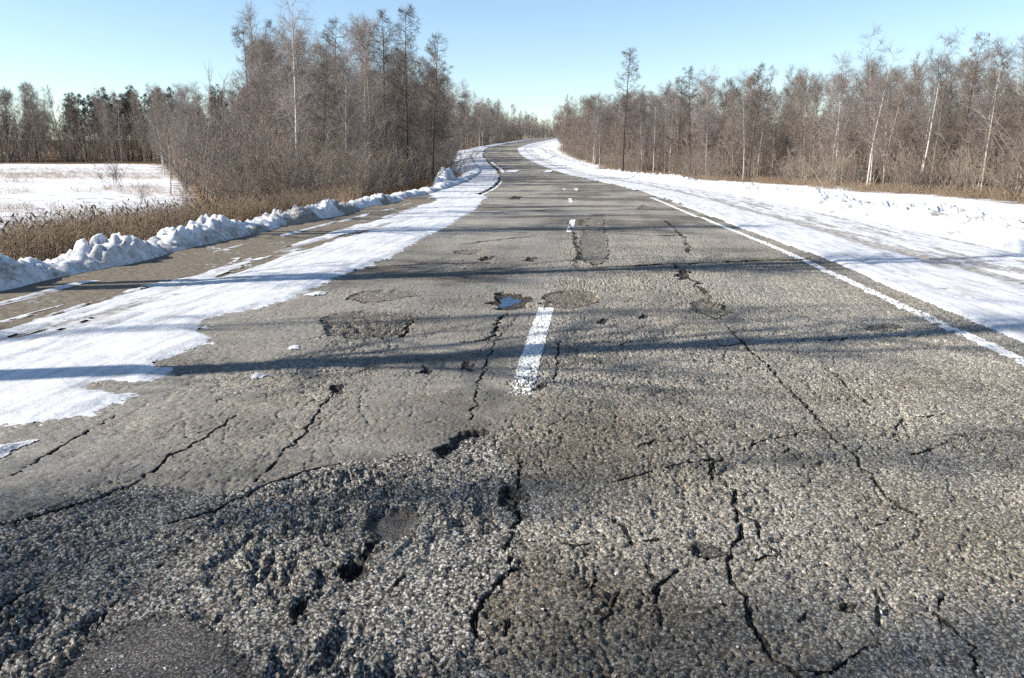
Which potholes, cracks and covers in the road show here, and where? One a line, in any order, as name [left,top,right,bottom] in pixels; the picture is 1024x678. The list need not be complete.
pothole [486,291,534,311]
crack [171,393,341,524]
crack [537,209,917,678]
crack [934,595,978,678]
crack [0,415,237,526]
crack [463,314,509,343]
